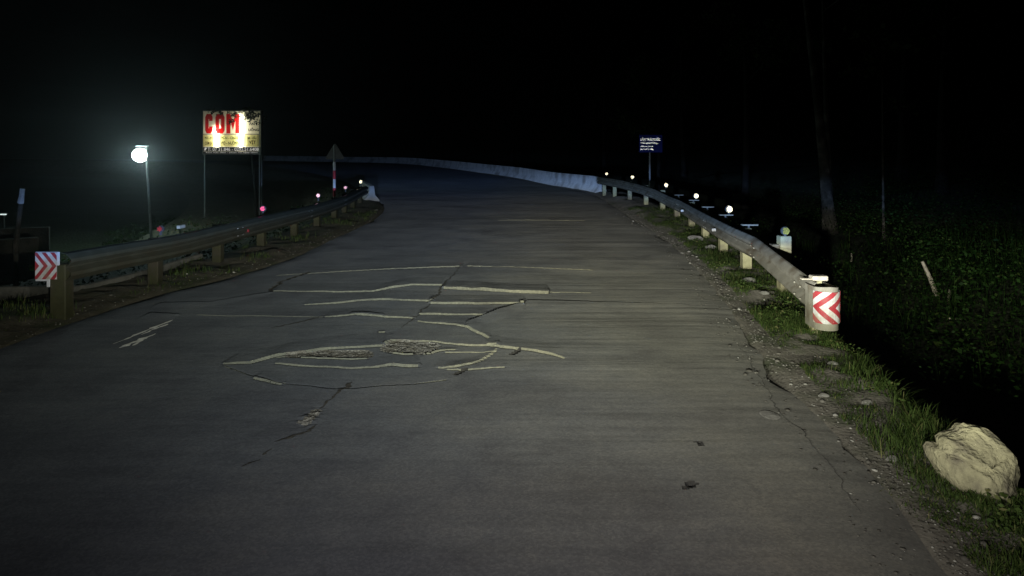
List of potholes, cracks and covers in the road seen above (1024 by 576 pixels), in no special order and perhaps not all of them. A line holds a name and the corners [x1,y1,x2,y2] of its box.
crack [152,265,676,467]
pothole [380,339,442,355]
pothole [284,350,374,359]
crack [748,356,861,512]
